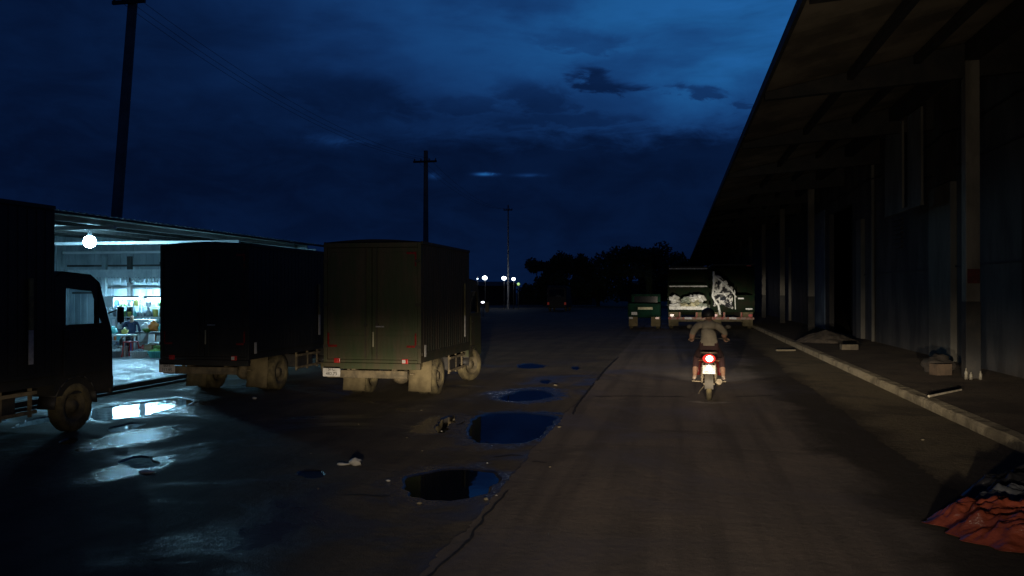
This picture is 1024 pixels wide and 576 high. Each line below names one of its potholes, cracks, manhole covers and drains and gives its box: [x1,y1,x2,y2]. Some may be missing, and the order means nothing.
pothole [117,455,160,468]
pothole [434,415,456,433]
pothole [401,468,502,501]
pothole [465,412,559,444]
pothole [89,398,196,421]
pothole [297,469,325,479]
pothole [498,389,555,401]
